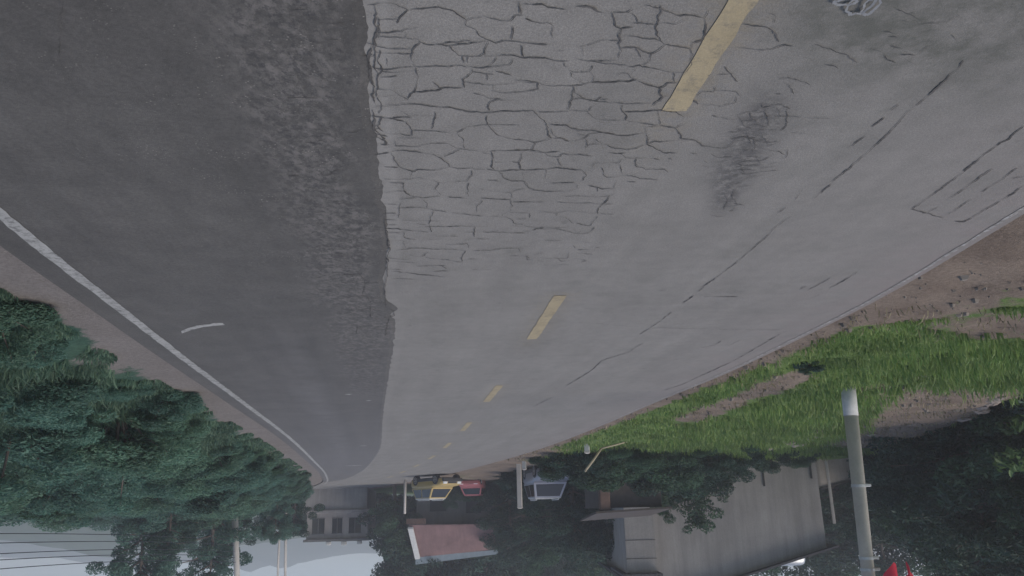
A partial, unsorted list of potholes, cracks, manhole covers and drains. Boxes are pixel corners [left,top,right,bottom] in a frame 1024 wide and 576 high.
crack [533,61,964,407]
crack [346,2,857,277]
crack [911,127,1024,222]
